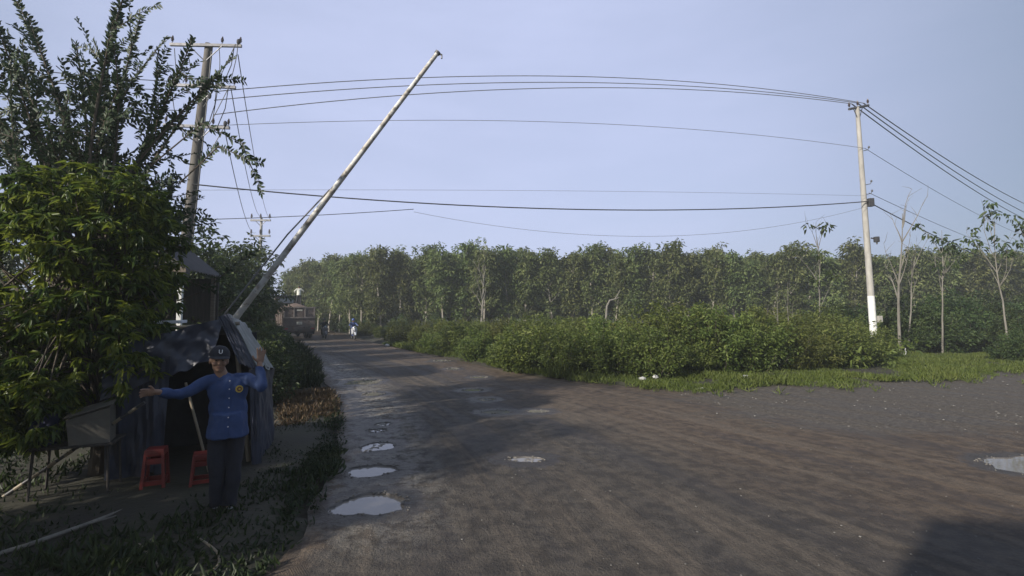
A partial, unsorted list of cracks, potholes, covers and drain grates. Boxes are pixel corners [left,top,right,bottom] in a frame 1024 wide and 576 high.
pothole [974,454,1024,475]
pothole [359,441,397,452]
pothole [319,490,411,517]
pothole [344,462,402,478]
